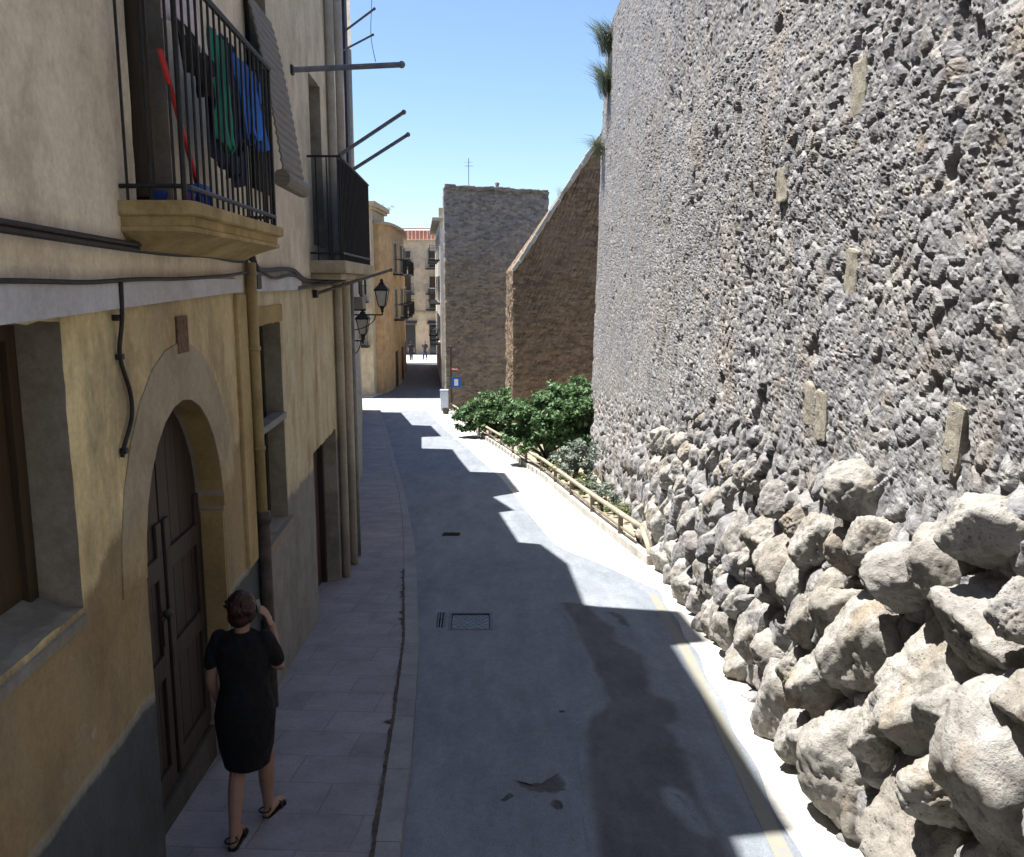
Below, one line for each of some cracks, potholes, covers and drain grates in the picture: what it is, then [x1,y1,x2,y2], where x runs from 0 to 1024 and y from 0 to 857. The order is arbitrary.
pothole [549,799,563,809]
pothole [512,772,567,794]
manhole cover [448,613,493,630]
